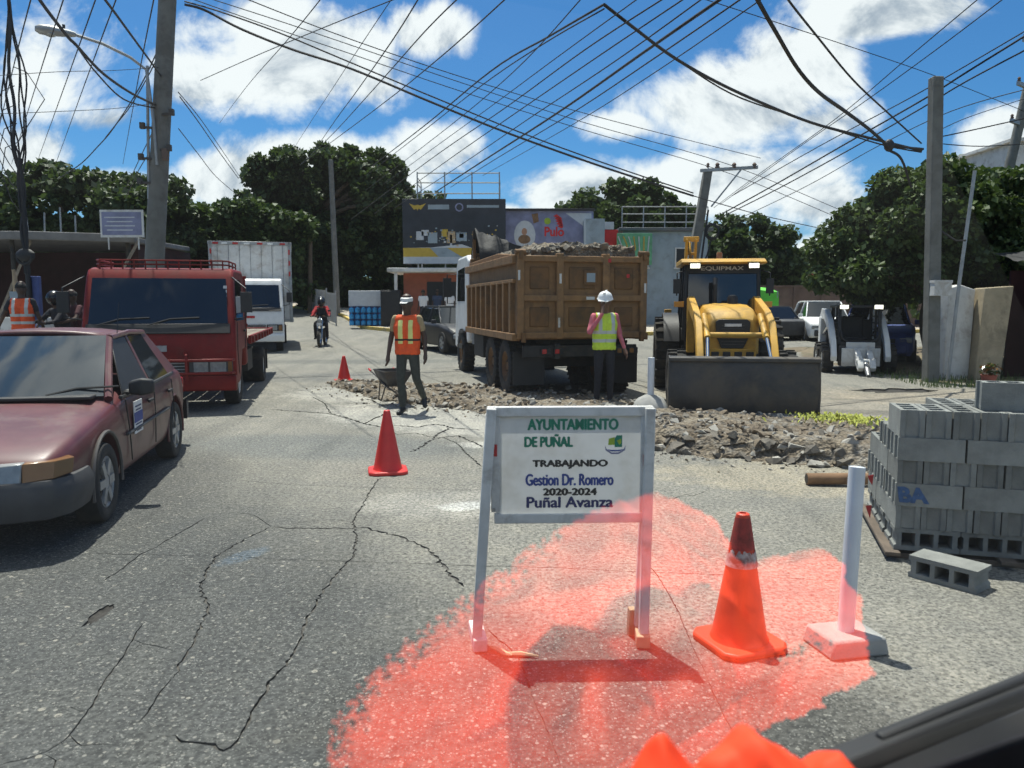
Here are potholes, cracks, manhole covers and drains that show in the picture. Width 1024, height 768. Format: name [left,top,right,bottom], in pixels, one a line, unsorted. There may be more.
crack [276,397,482,466]
crack [1,477,835,768]
pothole [81,604,115,627]
